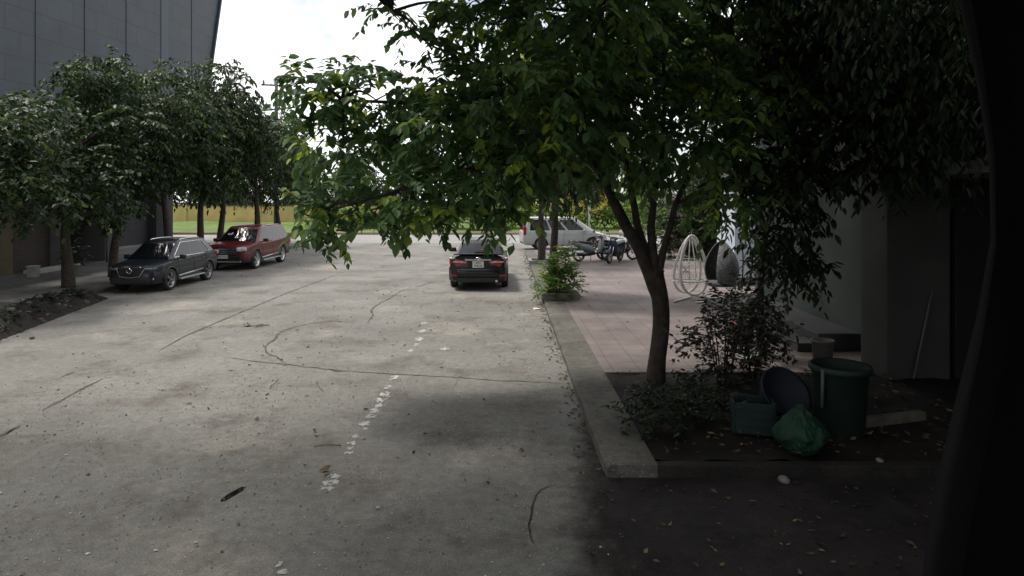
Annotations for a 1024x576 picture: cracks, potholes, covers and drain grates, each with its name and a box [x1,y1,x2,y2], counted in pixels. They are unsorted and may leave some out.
crack [528,485,553,544]
crack [0,274,338,436]
crack [227,282,552,392]
